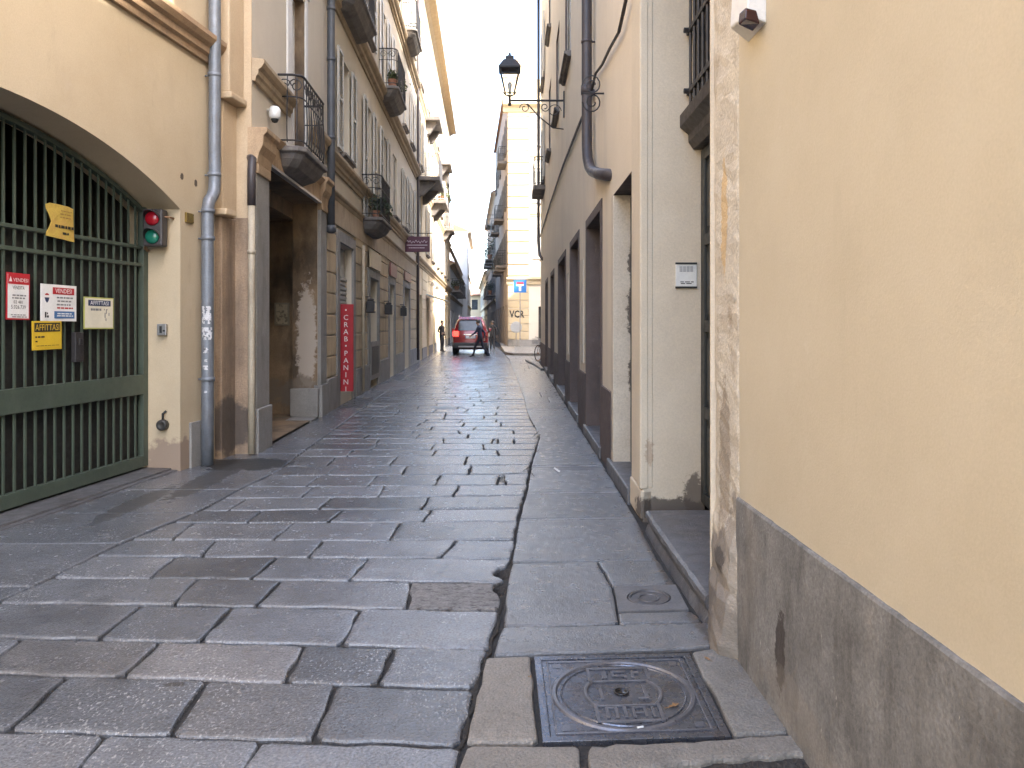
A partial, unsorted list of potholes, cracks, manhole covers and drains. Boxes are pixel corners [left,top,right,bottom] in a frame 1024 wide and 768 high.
manhole cover [614,584,688,615]
manhole cover [534,653,731,747]
